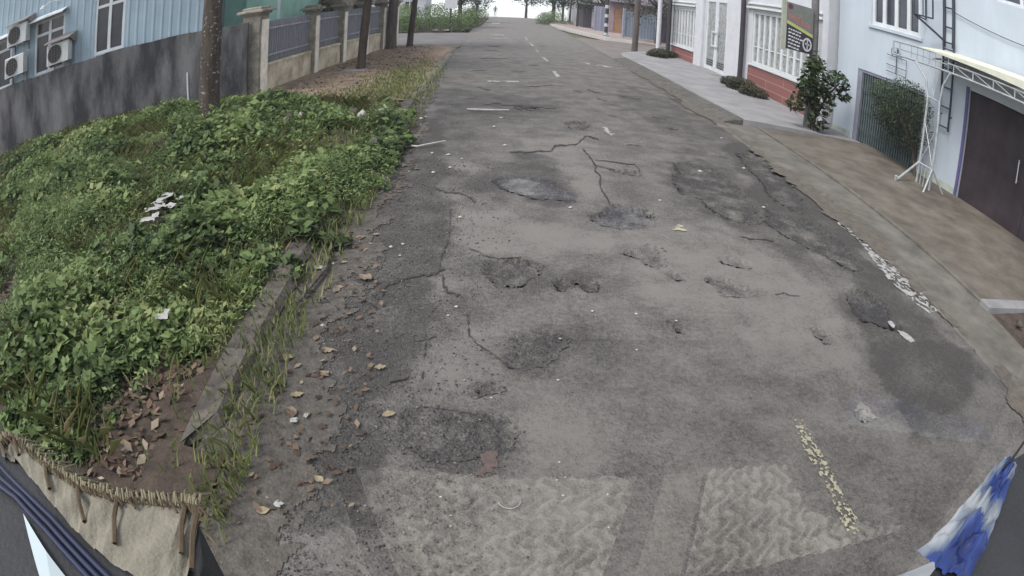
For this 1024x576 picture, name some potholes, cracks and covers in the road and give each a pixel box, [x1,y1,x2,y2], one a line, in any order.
pothole [845,288,903,331]
pothole [491,175,579,202]
pothole [480,258,545,288]
crack [510,136,640,205]
pothole [466,379,507,399]
pothole [503,331,572,371]
pothole [552,276,599,293]
pothole [737,151,810,214]
pothole [398,404,520,464]
pothole [671,161,765,225]
pothole [704,274,758,298]
pothole [810,327,835,344]
